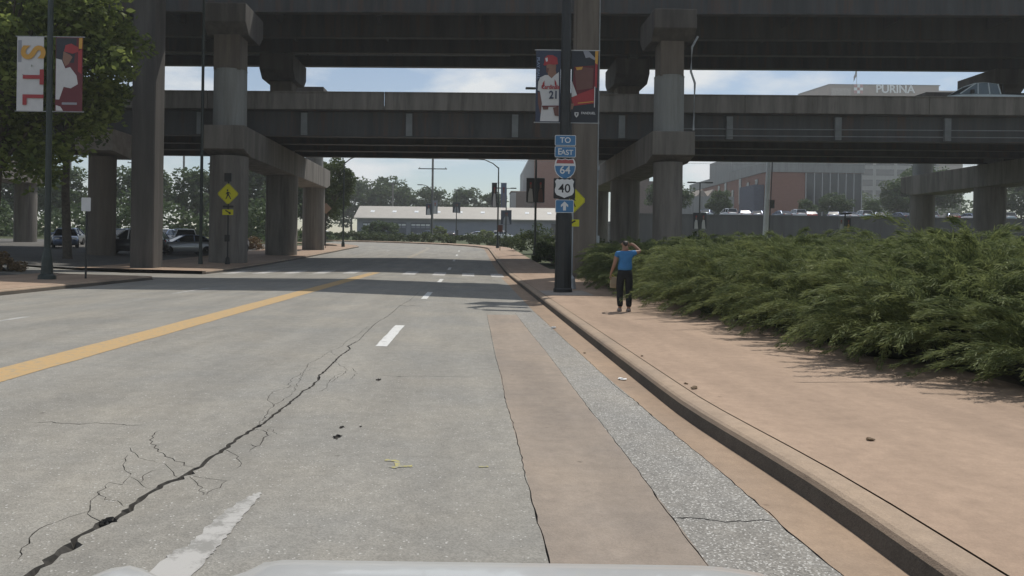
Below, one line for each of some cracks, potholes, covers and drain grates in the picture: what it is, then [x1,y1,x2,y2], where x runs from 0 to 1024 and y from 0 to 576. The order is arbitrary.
crack [18,299,411,576]
